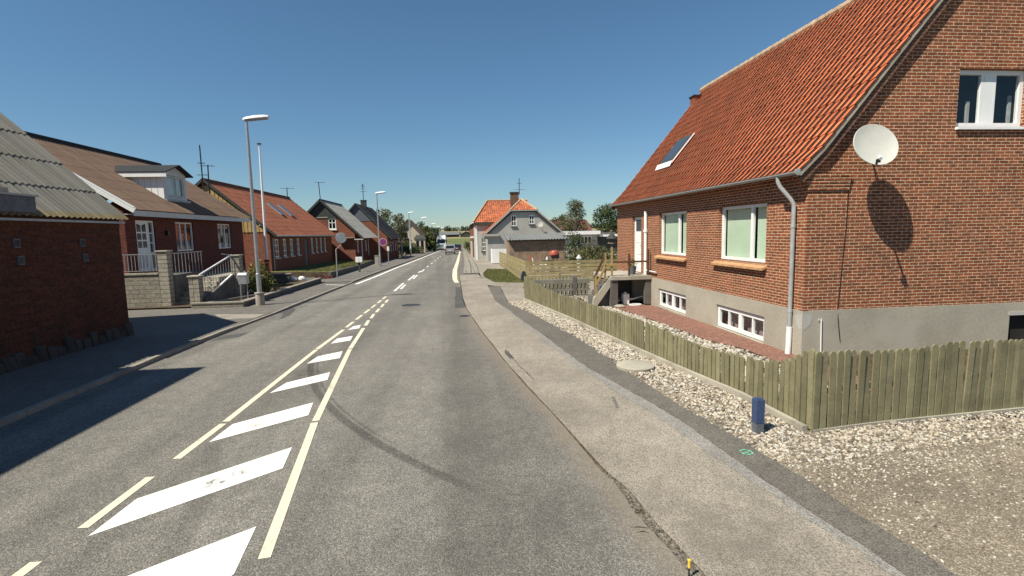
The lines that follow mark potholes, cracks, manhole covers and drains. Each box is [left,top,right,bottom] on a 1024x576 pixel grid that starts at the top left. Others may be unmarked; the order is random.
manhole cover [616,360,655,373]
